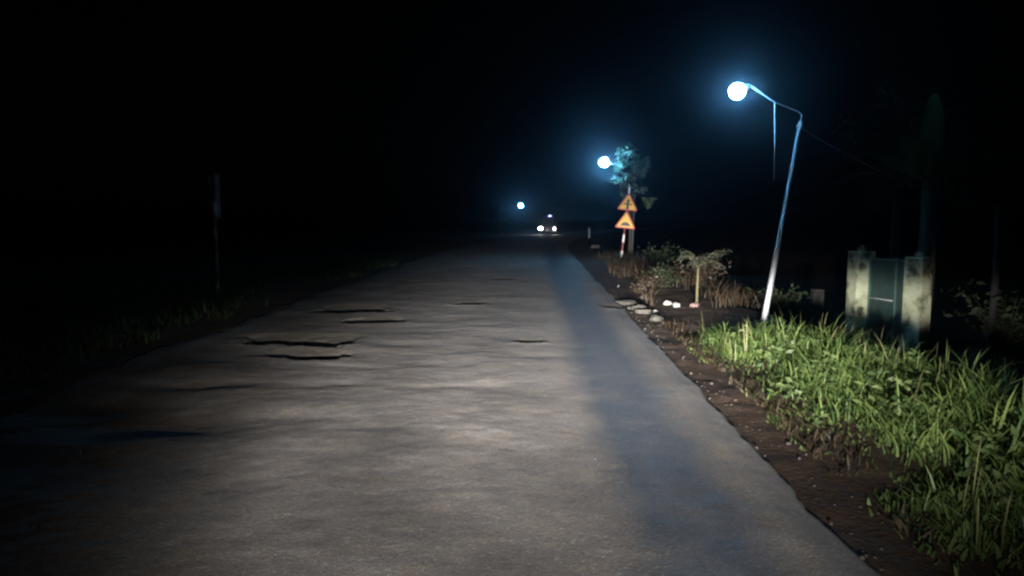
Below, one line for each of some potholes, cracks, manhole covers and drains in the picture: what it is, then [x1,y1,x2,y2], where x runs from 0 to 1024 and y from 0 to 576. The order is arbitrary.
pothole [305,303,399,314]
pothole [222,331,368,348]
pothole [340,314,406,324]
pothole [262,346,356,361]
